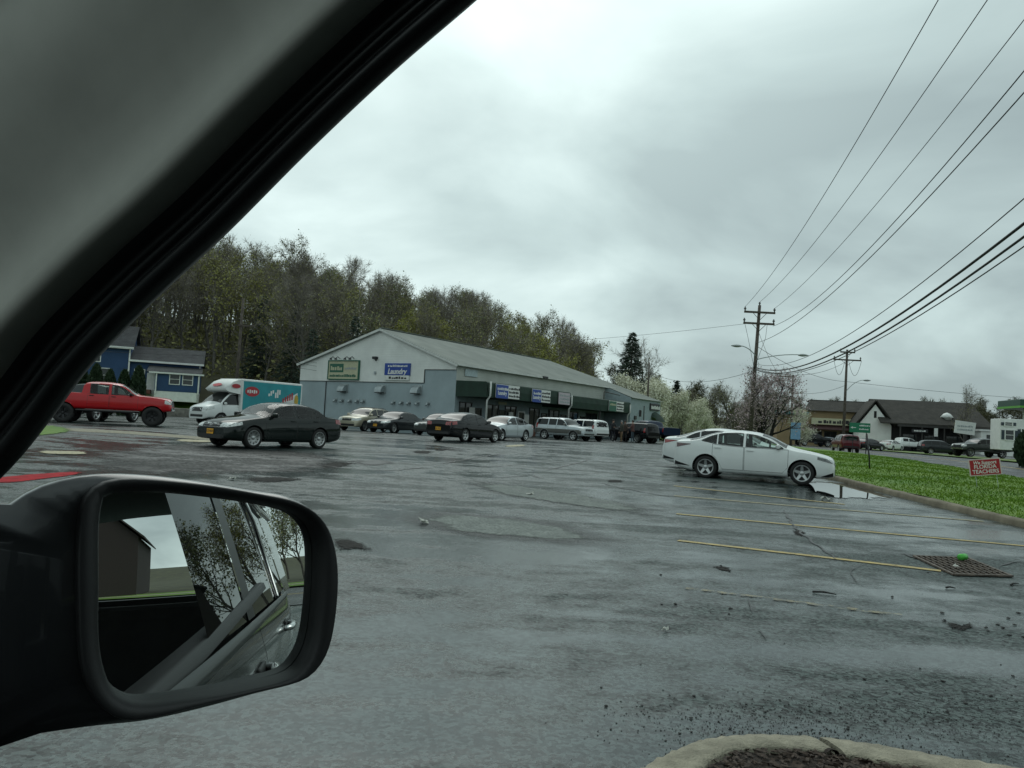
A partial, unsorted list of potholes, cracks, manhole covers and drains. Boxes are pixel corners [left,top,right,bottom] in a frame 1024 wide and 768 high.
drain grate [913,555,1014,577]
pothole [335,538,371,551]
crack [783,509,864,582]
